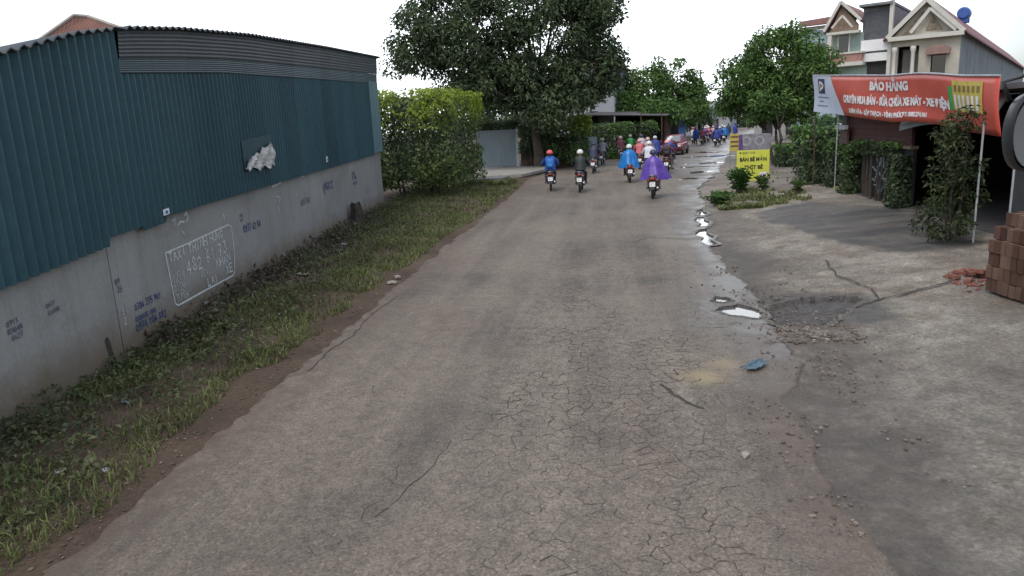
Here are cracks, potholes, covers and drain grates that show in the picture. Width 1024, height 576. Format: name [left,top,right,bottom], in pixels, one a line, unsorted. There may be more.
pothole [759,294,870,330]
crack [381,209,807,576]
crack [239,296,495,556]
